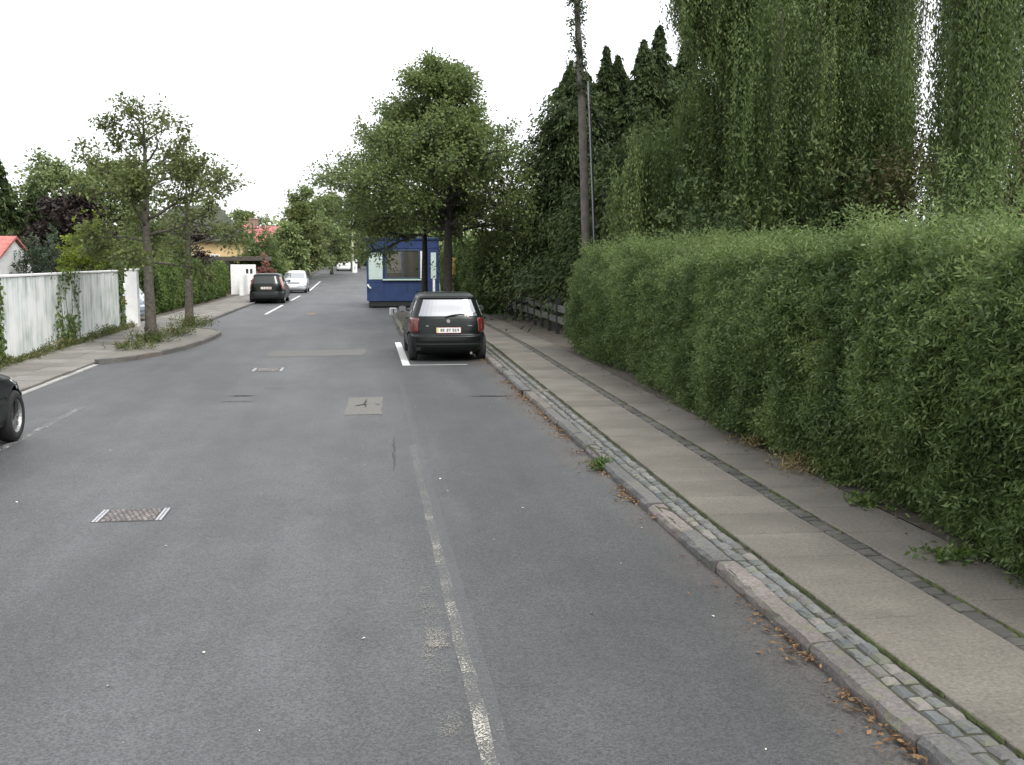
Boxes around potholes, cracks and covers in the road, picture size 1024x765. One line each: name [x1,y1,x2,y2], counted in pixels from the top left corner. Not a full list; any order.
manhole cover [90,508,172,523]
